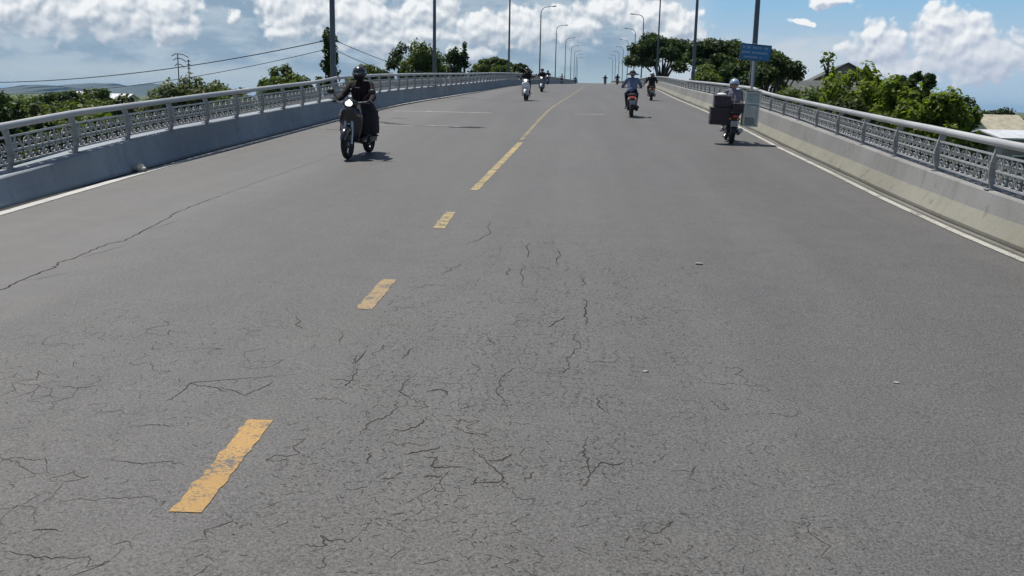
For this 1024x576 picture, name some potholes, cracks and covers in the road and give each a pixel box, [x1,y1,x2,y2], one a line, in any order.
crack [0,153,340,290]
